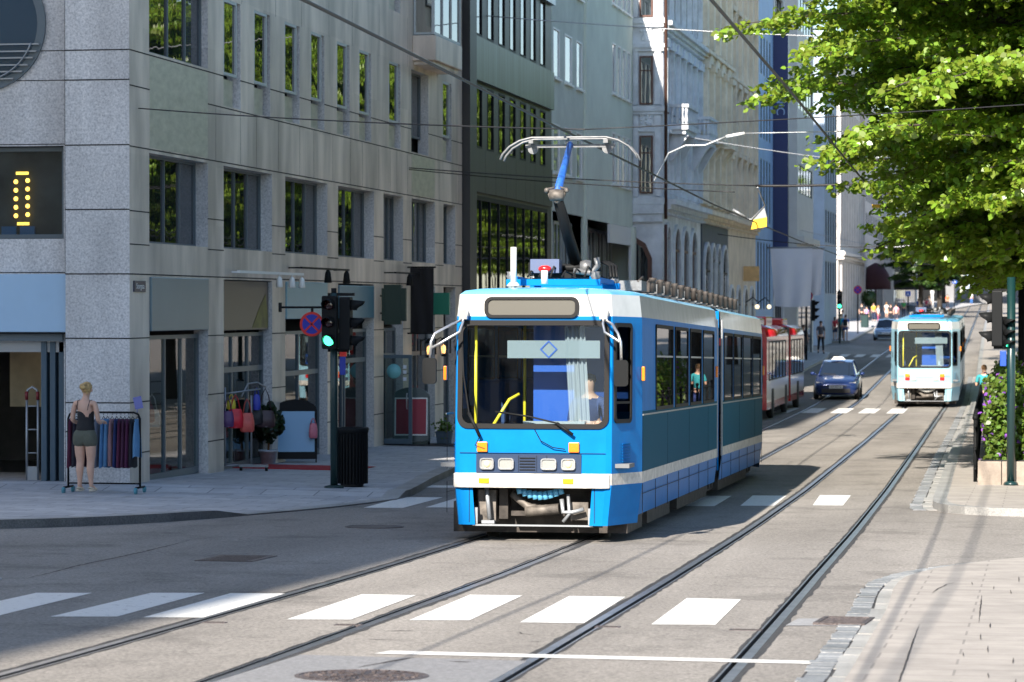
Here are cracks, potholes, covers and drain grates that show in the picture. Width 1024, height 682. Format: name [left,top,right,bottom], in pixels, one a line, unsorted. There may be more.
manhole cover [294,669,429,682]
